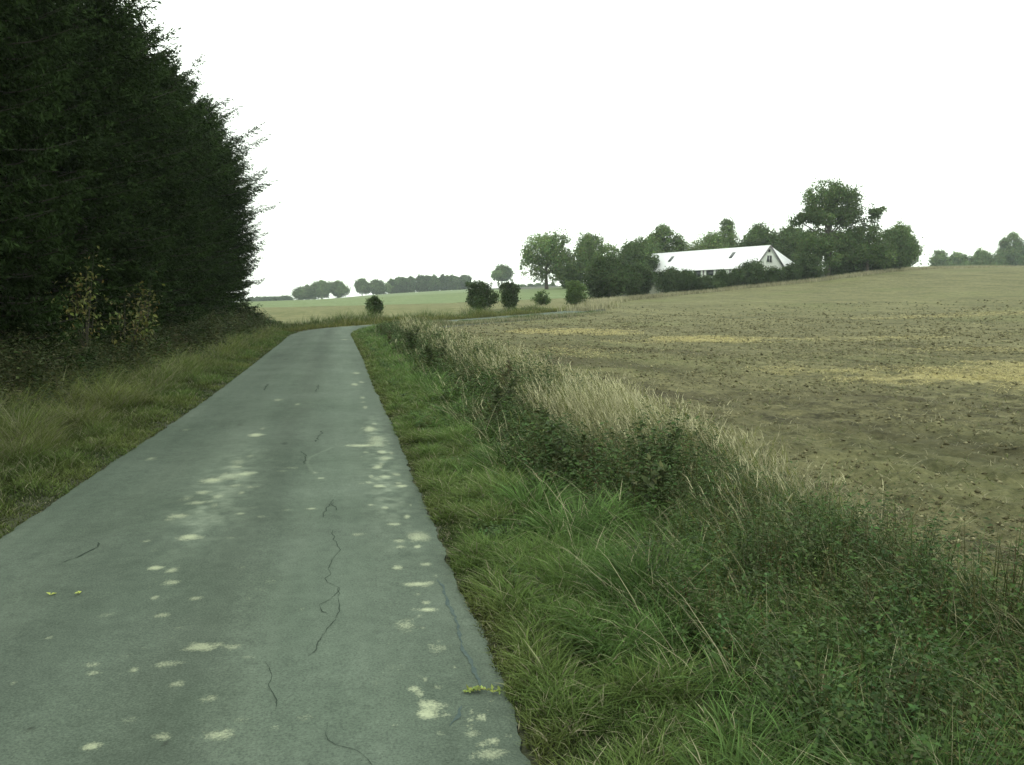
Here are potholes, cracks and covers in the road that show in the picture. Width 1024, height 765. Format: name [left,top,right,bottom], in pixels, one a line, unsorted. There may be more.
crack [311,499,341,654]
